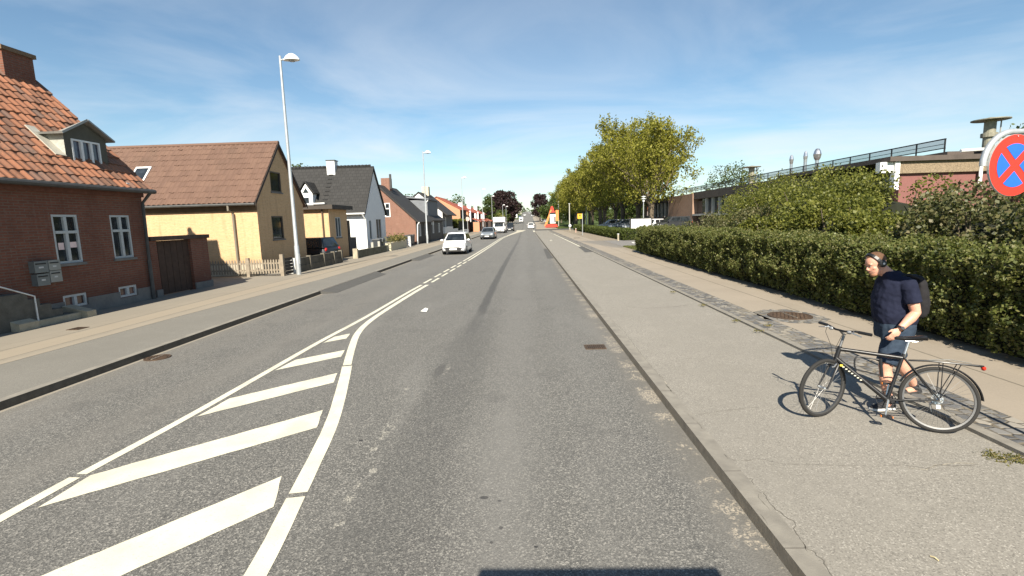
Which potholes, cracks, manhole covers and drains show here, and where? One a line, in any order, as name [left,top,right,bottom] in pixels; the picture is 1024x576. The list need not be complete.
manhole cover [767,312,813,320]
